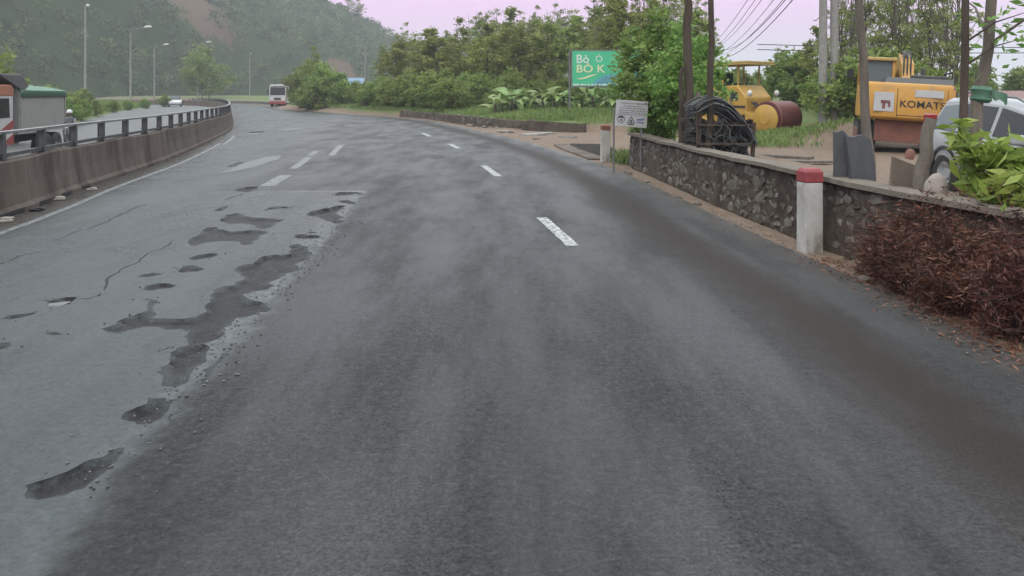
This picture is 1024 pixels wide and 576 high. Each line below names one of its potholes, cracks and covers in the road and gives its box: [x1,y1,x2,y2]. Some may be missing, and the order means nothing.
pothole [220,213,284,229]
pothole [24,447,124,500]
pothole [121,398,173,424]
pothole [101,244,312,388]
crack [81,241,172,299]
crack [0,202,150,264]
pothole [42,297,77,306]
pothole [188,227,269,246]
pothole [307,205,346,224]
